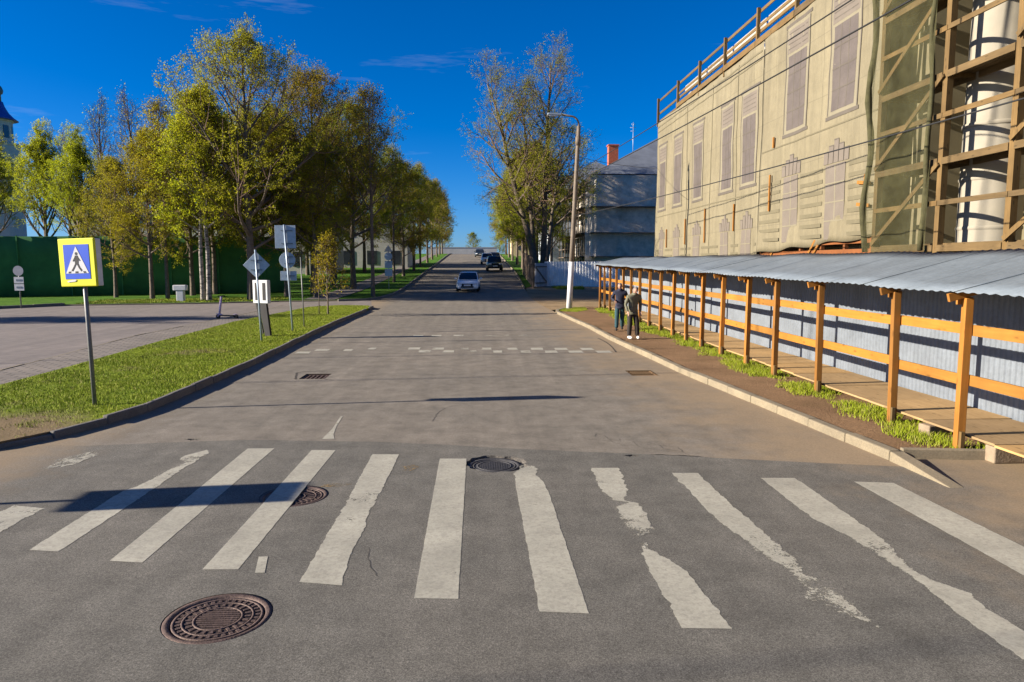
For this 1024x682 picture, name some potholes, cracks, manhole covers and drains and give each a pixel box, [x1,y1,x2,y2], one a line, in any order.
manhole cover [468,458,521,473]
manhole cover [160,594,273,644]
manhole cover [259,486,329,507]
